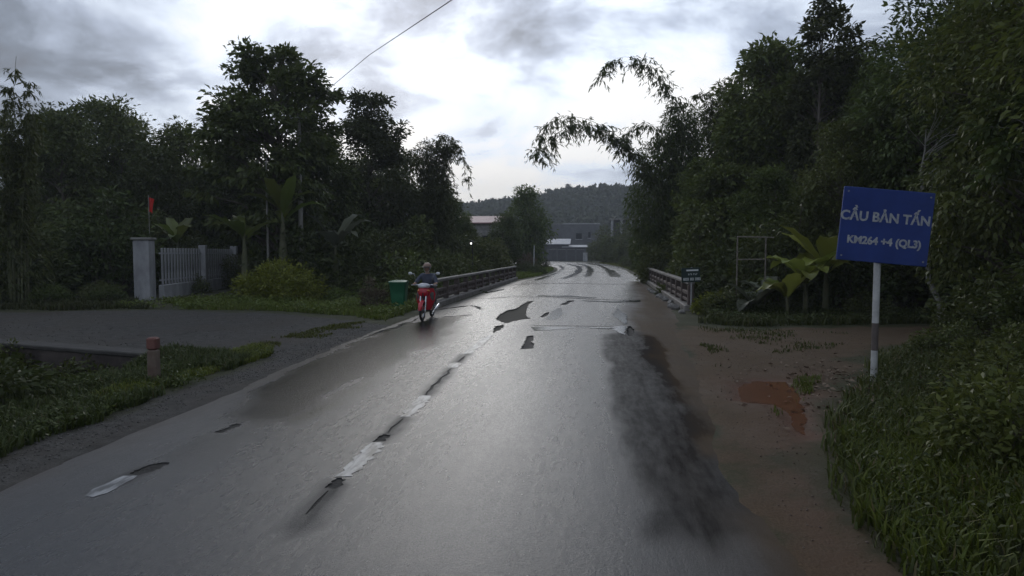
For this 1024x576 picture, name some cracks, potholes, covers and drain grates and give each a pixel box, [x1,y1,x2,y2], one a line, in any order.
pothole [520,336,534,349]
crack [306,491,328,514]
pothole [130,462,170,475]
crack [426,356,465,395]
pothole [496,301,533,323]
